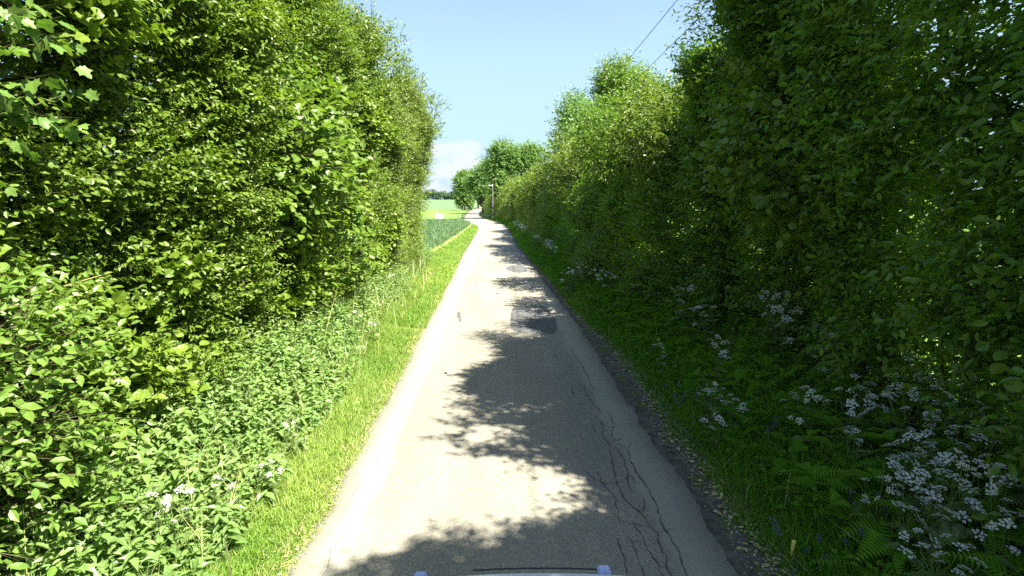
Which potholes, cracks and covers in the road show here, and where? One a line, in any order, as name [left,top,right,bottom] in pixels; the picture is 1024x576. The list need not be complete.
crack [568,349,688,576]
